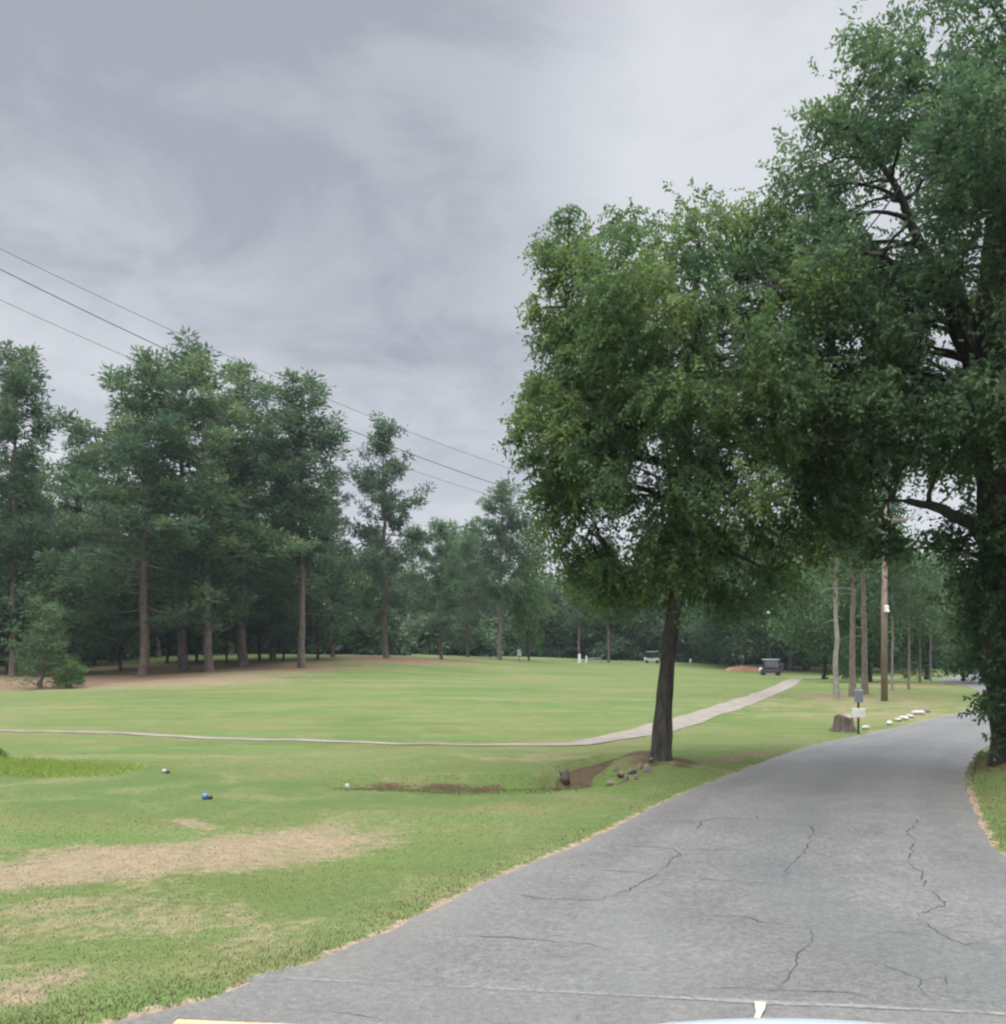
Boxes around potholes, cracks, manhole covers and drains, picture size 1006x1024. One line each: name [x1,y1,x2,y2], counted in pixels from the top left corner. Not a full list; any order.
crack [691,915,988,1003]
crack [688,824,815,885]
crack [884,818,984,944]
crack [511,844,749,900]
crack [436,933,605,949]
